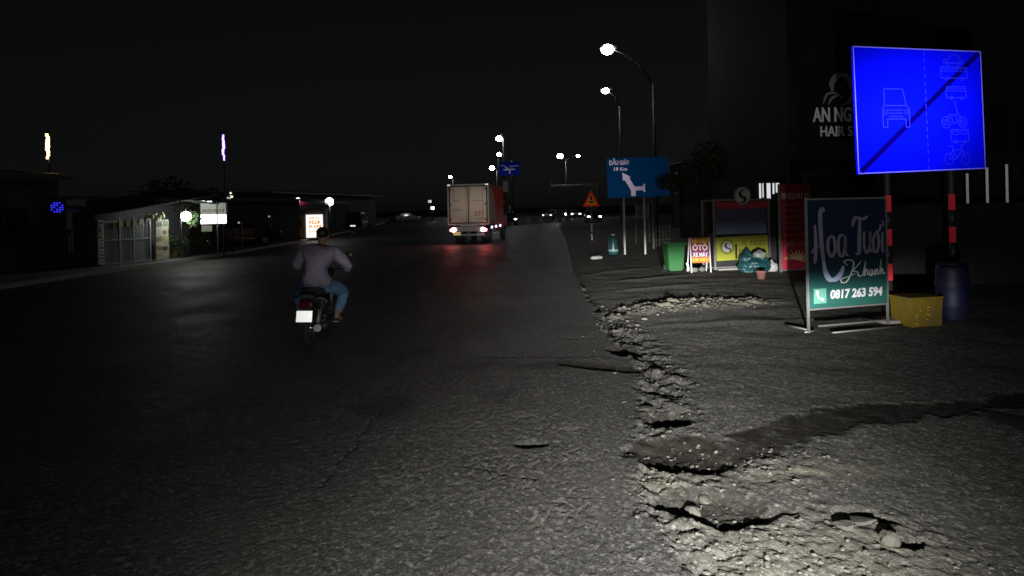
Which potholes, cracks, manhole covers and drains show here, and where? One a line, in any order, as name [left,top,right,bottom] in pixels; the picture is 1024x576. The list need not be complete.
pothole [878,516,897,524]
pothole [512,439,551,449]
pothole [617,431,743,477]
pothole [900,534,926,550]
pothole [642,483,798,532]
pothole [637,411,696,428]
pothole [822,505,884,522]
